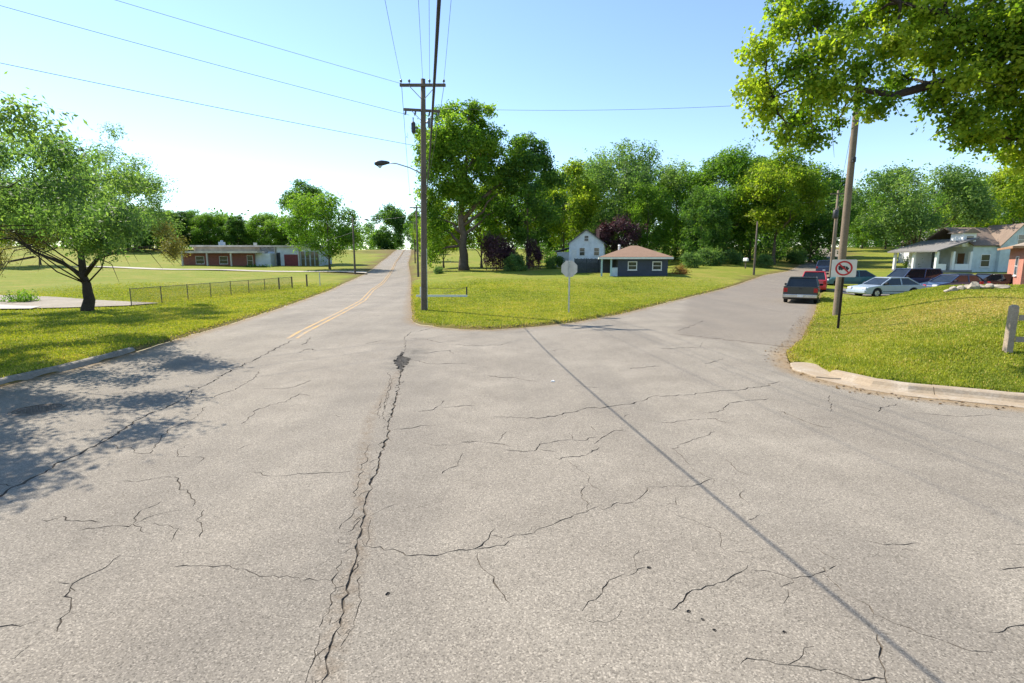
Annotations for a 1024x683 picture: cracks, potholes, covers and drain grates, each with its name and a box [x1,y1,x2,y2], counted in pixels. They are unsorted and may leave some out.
crack [57,556,119,631]
crack [43,477,203,540]
crack [665,515,993,683]
pothole [393,351,411,374]
manhole cover [7,403,66,416]
crack [176,327,832,683]
